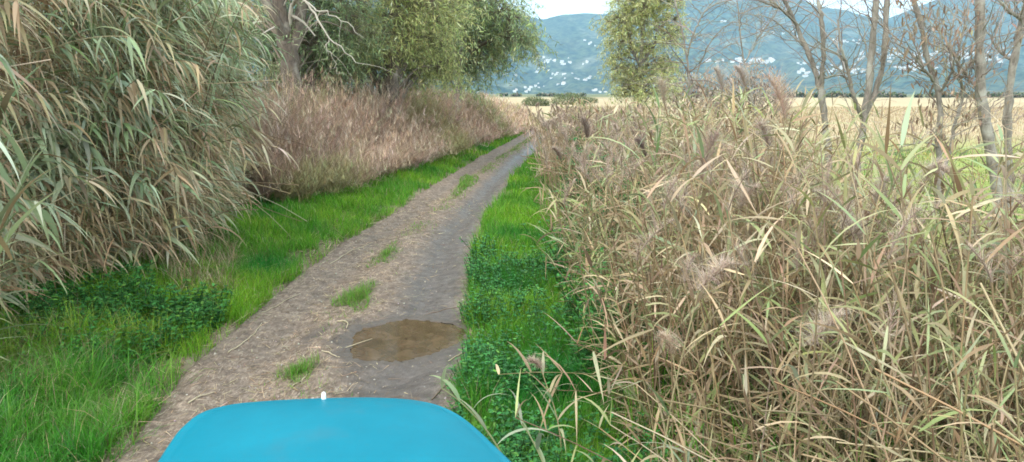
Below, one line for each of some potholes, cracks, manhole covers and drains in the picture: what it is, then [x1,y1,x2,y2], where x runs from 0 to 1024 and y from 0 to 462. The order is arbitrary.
pothole [309,310,495,382]
